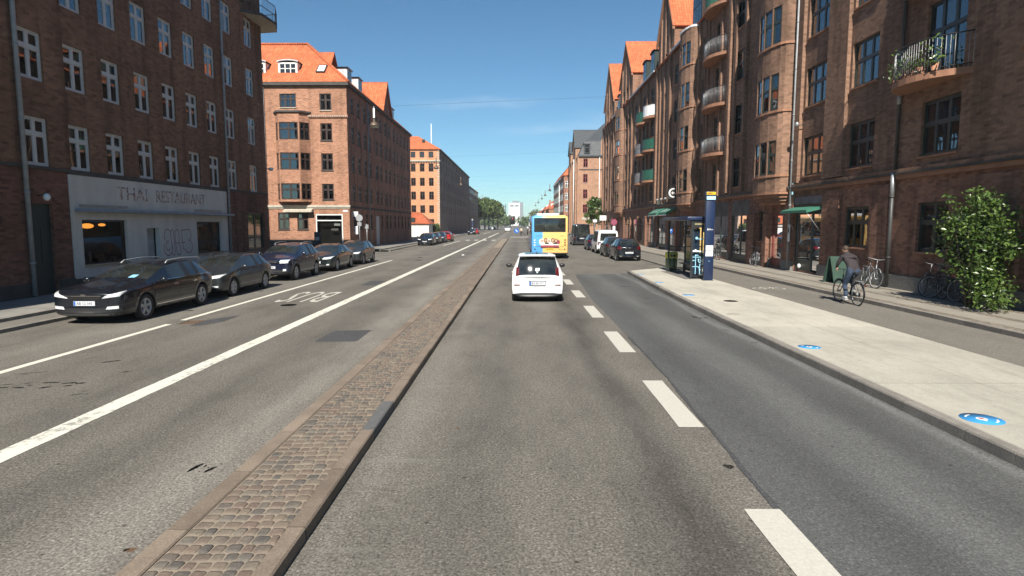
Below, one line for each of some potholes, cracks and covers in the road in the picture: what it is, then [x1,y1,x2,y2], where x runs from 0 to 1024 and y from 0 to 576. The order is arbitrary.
crack [0,371,85,395]
